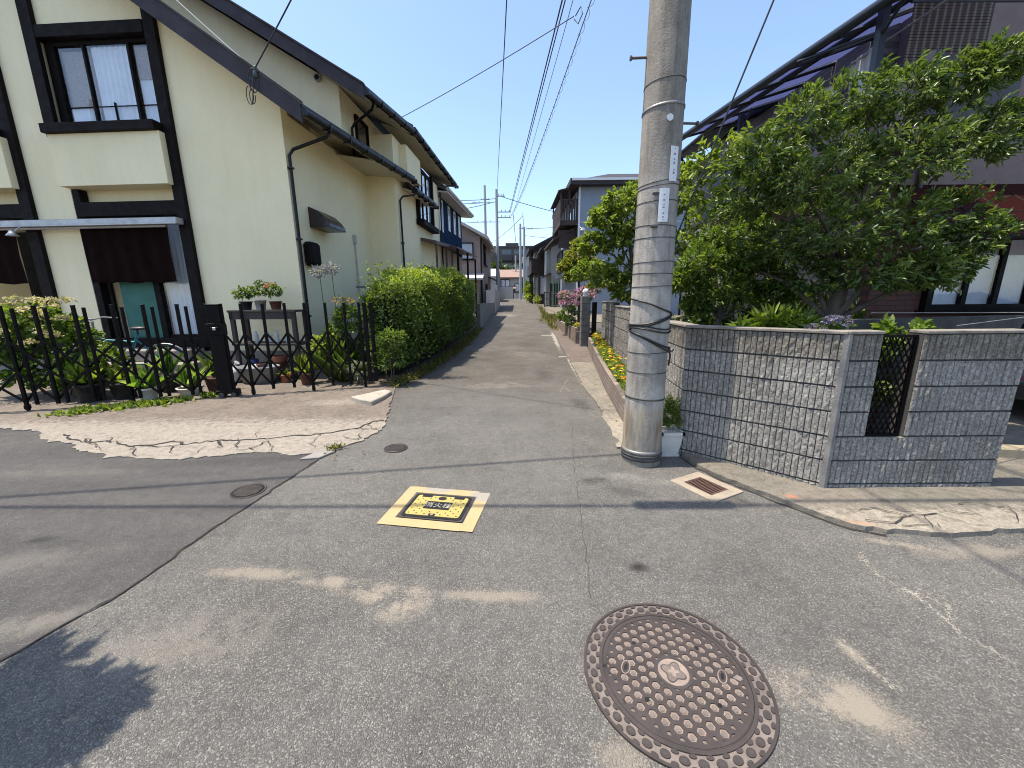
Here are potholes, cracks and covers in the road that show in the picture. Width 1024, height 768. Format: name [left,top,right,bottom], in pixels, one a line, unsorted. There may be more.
crack [63,420,384,456]
crack [859,500,1022,527]
manhole cover [584,603,780,768]
manhole cover [229,483,267,499]
drain grate [670,472,744,504]
crack [858,551,1015,664]
manhole cover [384,443,408,453]
